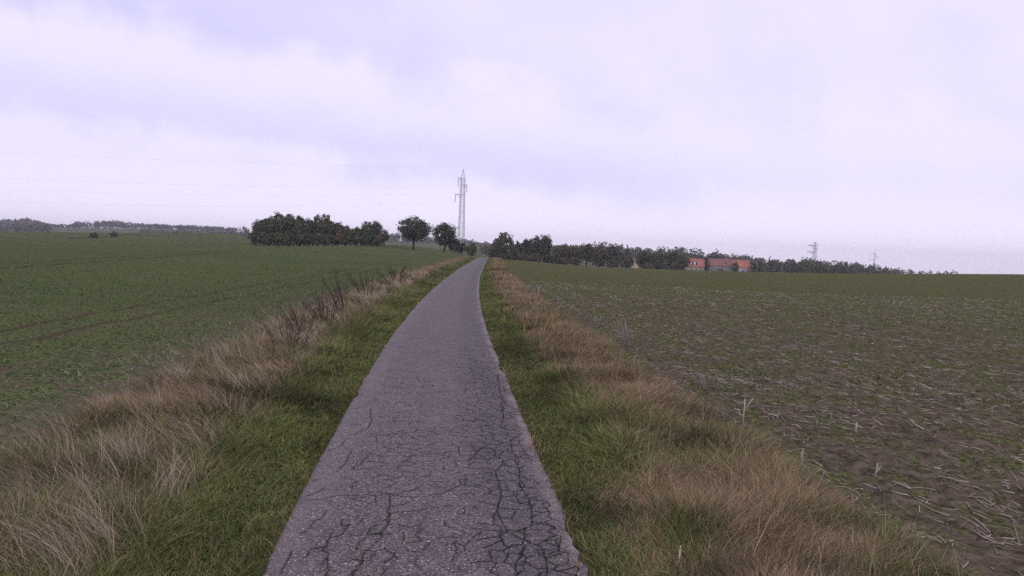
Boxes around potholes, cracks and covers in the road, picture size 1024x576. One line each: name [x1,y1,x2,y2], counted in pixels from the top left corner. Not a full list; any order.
crack [440,348,580,576]
crack [282,377,493,576]
